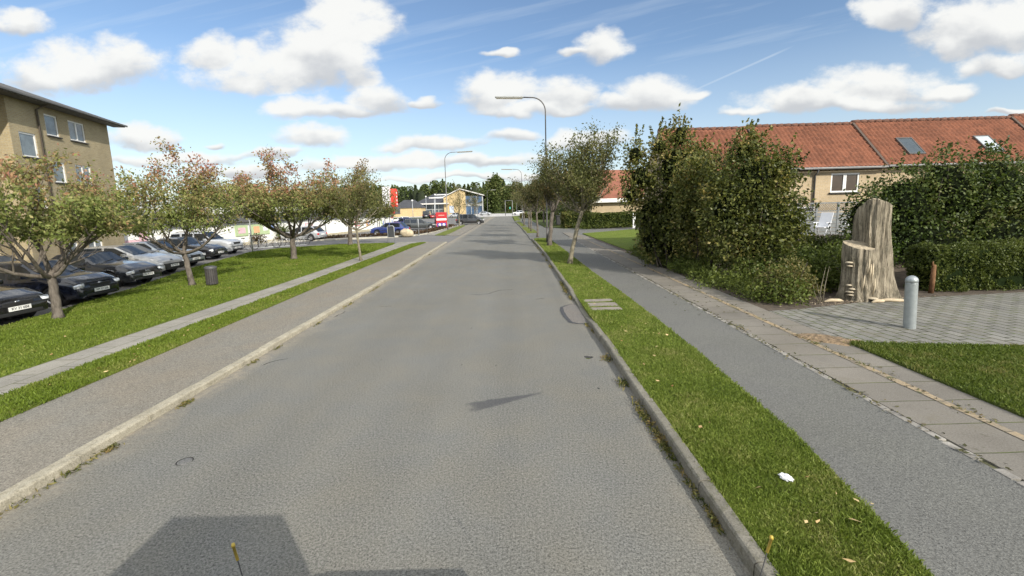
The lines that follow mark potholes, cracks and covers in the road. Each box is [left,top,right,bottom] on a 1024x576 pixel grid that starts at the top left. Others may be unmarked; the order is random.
manhole cover [175,457,194,466]
